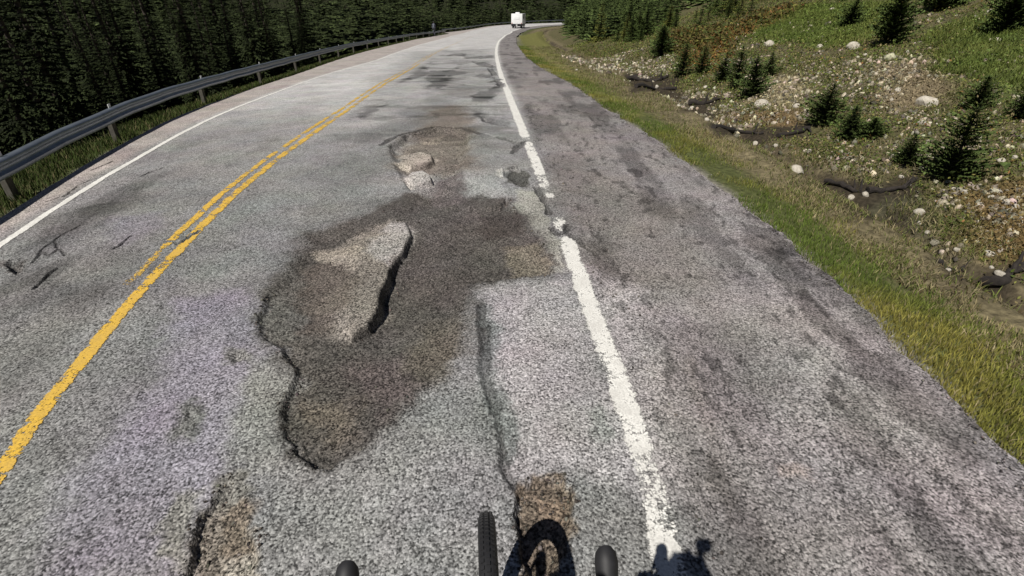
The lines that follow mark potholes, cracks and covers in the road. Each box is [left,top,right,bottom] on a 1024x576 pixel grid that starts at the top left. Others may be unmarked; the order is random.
pothole [505,165,530,188]
crack [30,224,83,290]
crack [532,186,600,256]
pothole [386,128,472,191]
pothole [254,188,554,472]
